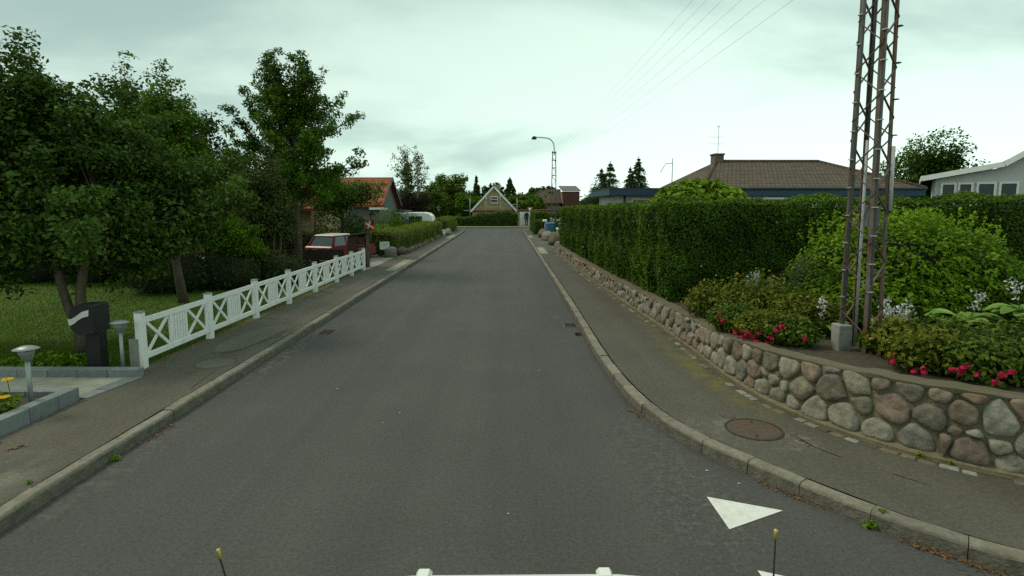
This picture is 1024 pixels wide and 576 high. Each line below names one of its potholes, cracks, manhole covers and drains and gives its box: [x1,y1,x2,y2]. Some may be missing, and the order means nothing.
manhole cover [724,418,785,441]
manhole cover [193,357,238,369]
